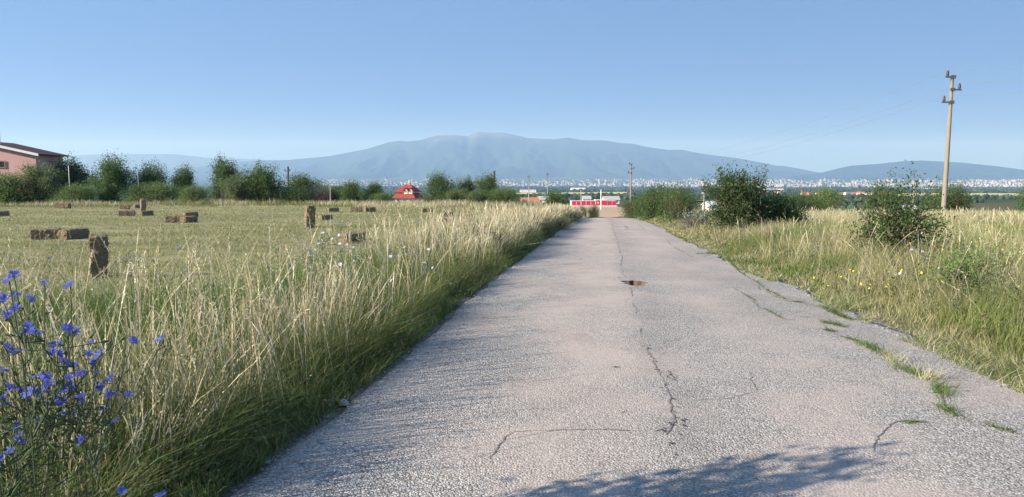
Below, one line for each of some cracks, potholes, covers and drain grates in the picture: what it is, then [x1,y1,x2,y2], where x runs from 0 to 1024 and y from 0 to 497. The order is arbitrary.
crack [873,420,933,454]
crack [657,240,1022,434]
crack [488,225,686,461]
